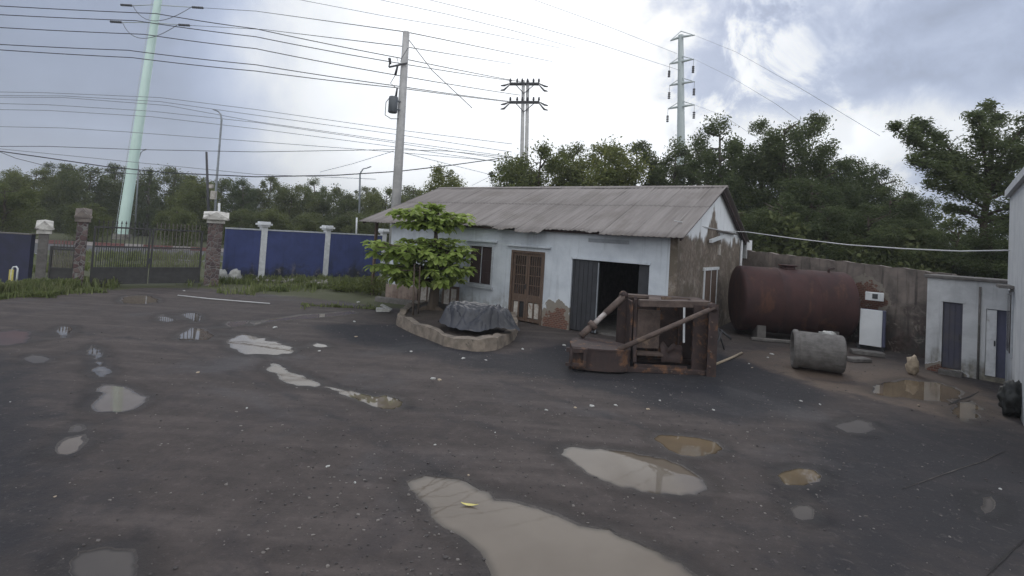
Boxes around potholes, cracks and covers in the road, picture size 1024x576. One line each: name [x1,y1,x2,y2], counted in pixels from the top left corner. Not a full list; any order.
pothole [777,468,822,486]
pothole [653,434,724,457]
